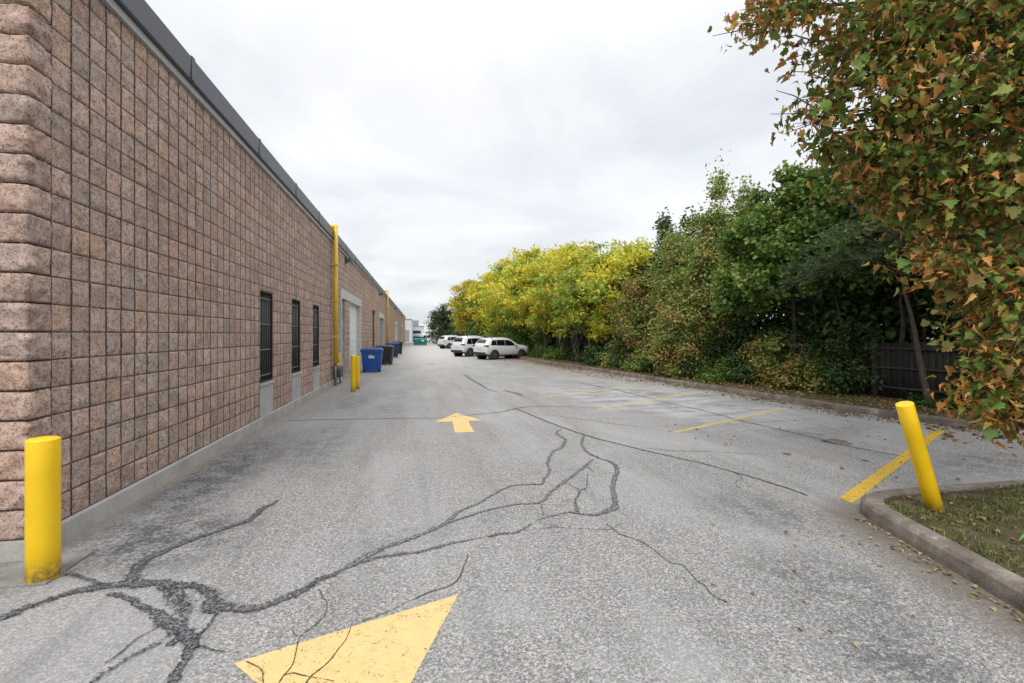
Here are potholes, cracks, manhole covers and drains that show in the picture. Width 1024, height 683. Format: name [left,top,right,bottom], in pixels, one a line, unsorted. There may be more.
crack [0,374,807,683]
